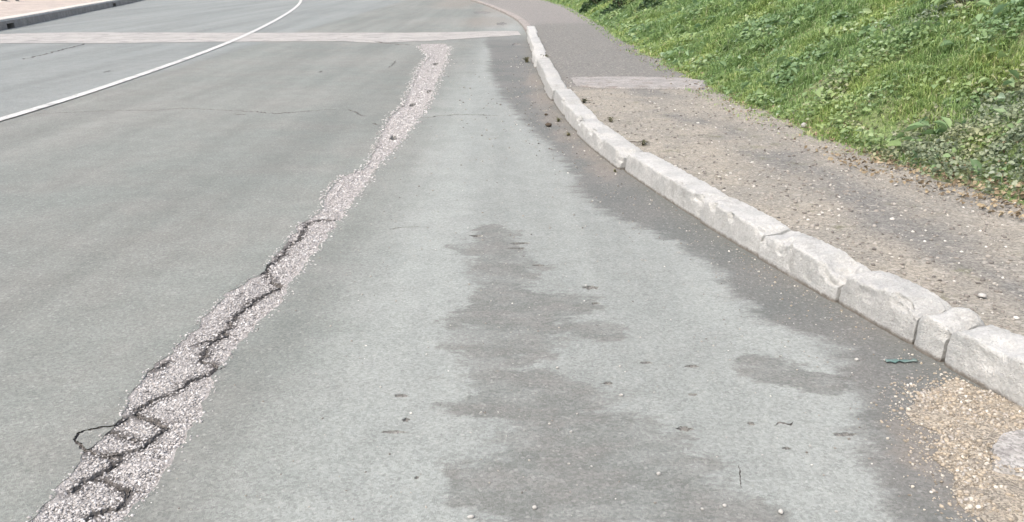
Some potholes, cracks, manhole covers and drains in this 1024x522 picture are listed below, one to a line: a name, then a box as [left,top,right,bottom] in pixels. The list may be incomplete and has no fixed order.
crack [39,108,377,125]
crack [71,219,337,522]
